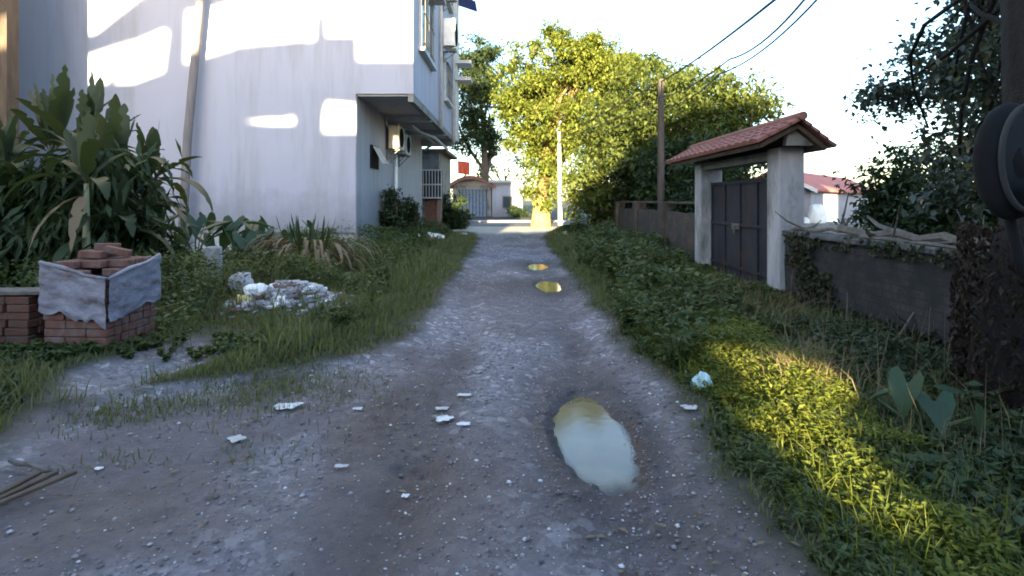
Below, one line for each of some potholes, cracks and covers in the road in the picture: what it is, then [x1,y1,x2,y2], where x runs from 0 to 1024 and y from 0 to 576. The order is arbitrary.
pothole [546,393,648,497]
pothole [533,277,567,293]
pothole [525,263,552,271]
